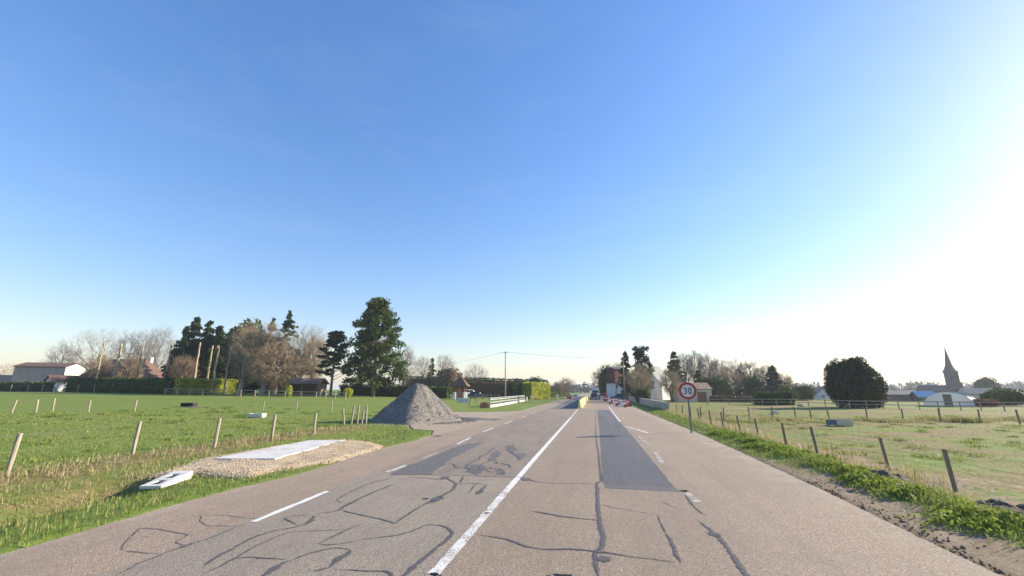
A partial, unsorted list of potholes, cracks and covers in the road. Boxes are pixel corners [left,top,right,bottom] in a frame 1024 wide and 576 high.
crack [200,445,520,576]
